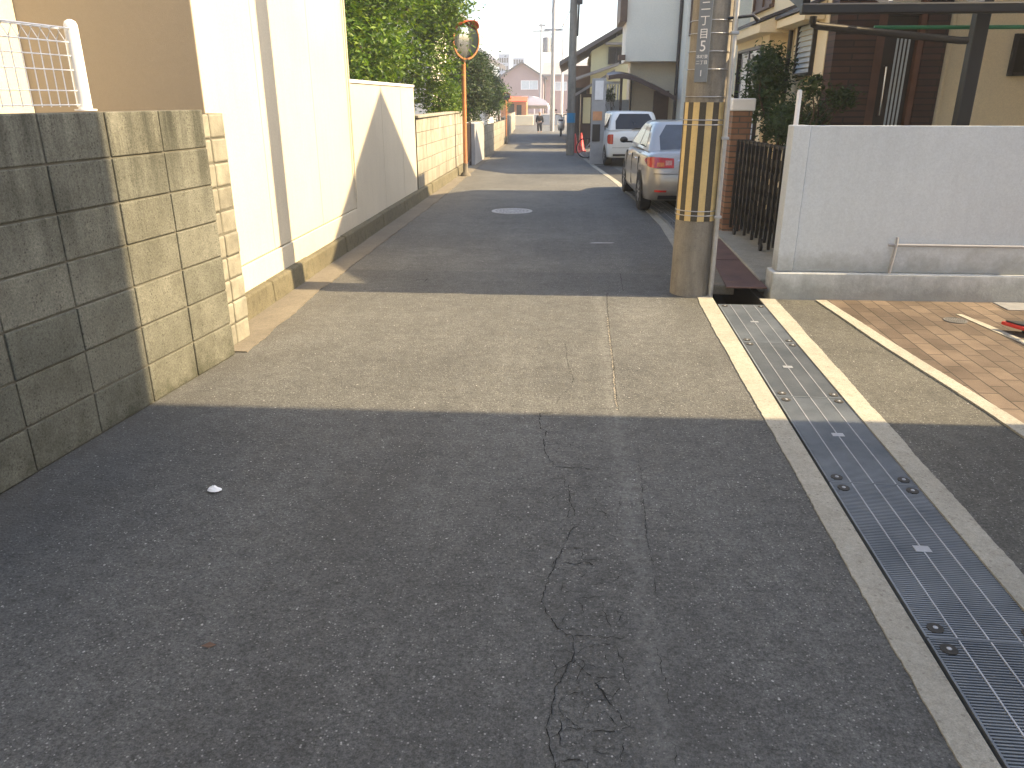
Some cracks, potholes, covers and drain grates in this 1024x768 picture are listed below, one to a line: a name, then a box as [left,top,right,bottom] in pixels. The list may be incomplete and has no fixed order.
crack [539,344,587,469]
crack [541,479,634,768]
drain grate [718,304,796,343]
drain grate [775,396,917,486]
drain grate [741,342,842,398]
drain grate [925,638,1024,768]
drain grate [828,482,1024,643]
